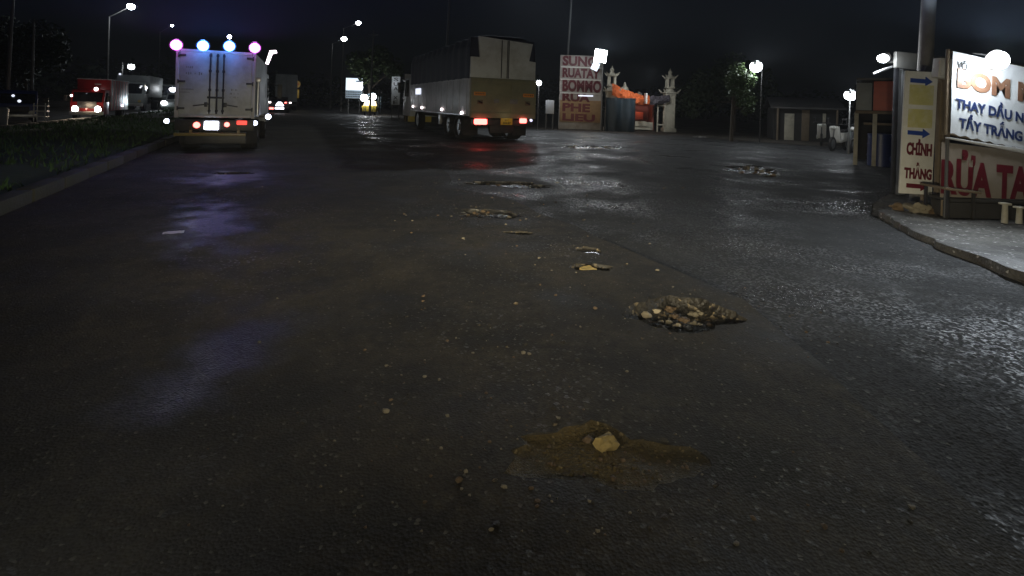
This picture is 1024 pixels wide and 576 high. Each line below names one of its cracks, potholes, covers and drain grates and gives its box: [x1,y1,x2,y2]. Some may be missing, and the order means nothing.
pothole [623,295,747,334]
pothole [569,263,613,271]
pothole [575,246,602,254]
pothole [503,420,712,491]
pothole [459,209,523,219]
pothole [722,165,780,177]
pothole [465,181,553,189]
